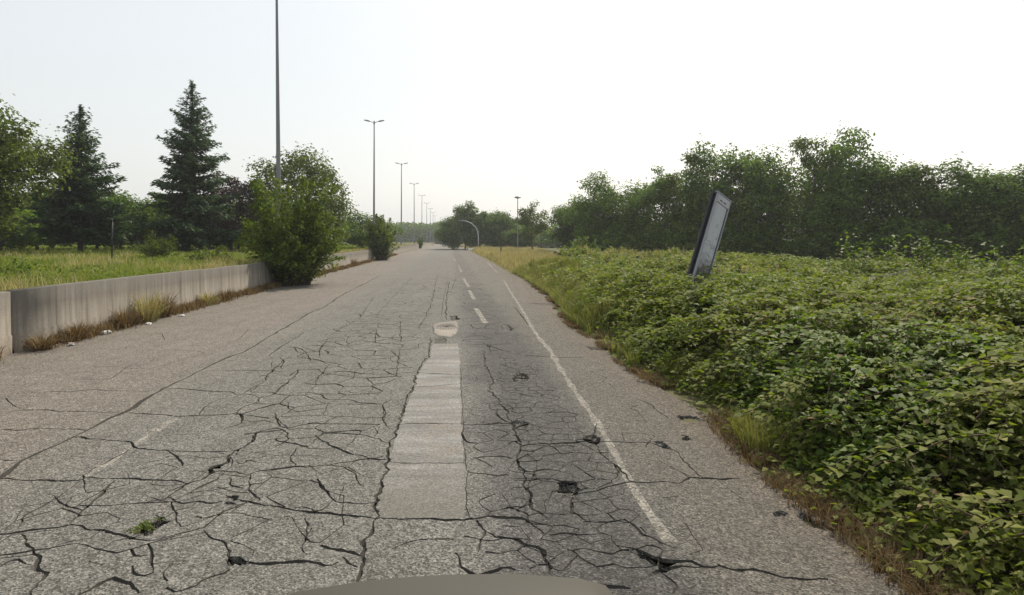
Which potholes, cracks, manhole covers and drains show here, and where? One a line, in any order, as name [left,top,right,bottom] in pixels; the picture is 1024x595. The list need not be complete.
pothole [636,550,679,573]
pothole [226,554,249,567]
pothole [556,482,582,499]
crack [0,278,828,595]
